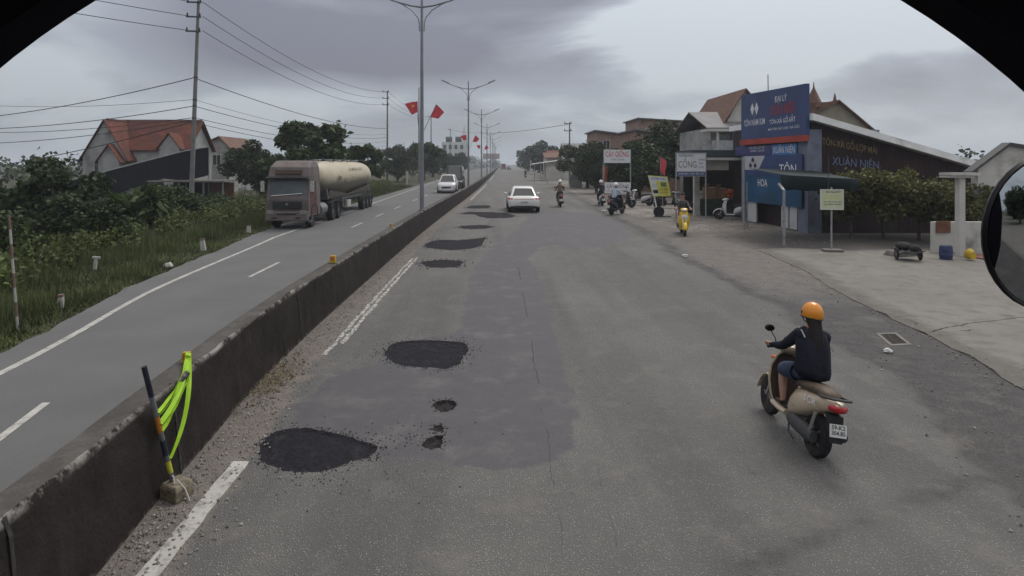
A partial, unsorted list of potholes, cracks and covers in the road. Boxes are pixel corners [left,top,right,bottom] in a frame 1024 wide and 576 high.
pothole [457,210,518,219]
pothole [429,397,458,413]
pothole [417,433,446,450]
drain grate [876,332,912,346]
crack [518,267,563,554]
pothole [370,337,482,373]
pothole [238,421,397,482]
pothole [421,236,492,251]
pothole [412,258,473,269]
